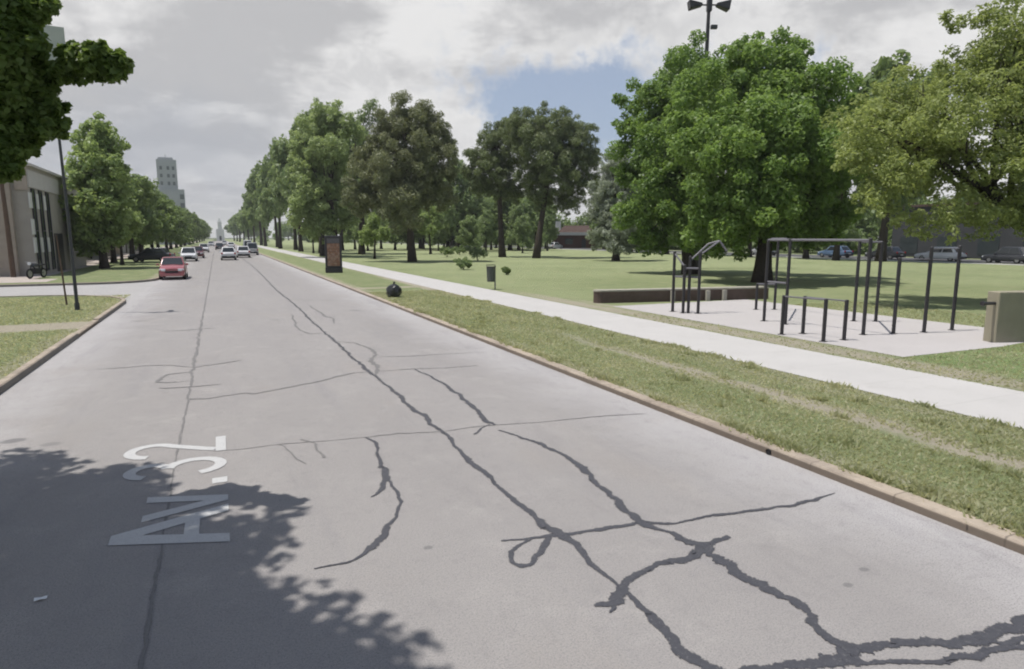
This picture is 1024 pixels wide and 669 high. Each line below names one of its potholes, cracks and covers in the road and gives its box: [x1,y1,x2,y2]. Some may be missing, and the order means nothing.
crack [106,352,477,399]
crack [292,306,335,334]
crack [279,439,326,463]
